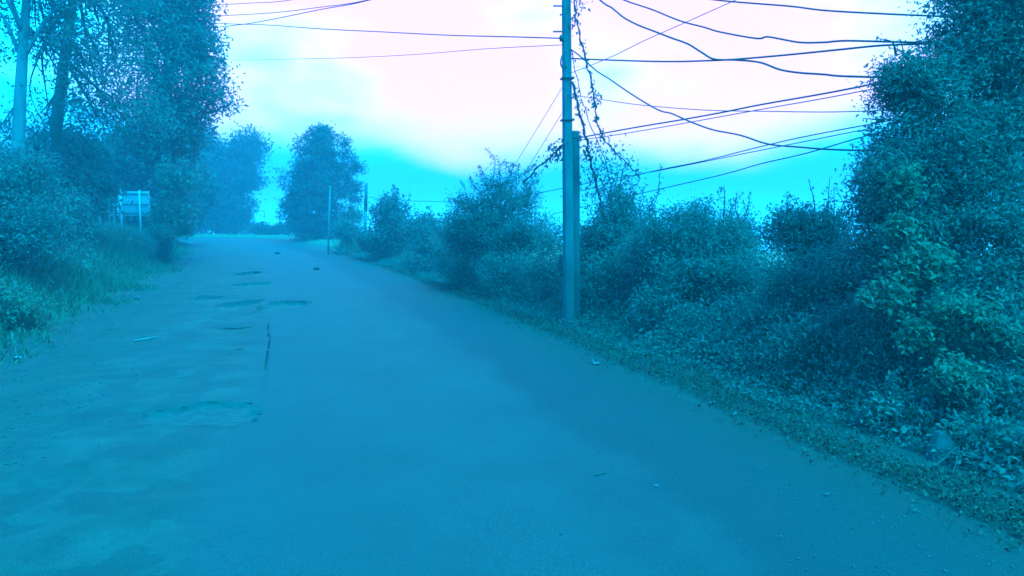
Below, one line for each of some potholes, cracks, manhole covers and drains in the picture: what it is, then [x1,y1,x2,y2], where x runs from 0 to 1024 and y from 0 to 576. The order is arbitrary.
crack [214,315,273,388]
pothole [253,300,315,312]
pothole [126,400,274,428]
pothole [210,299,267,309]
